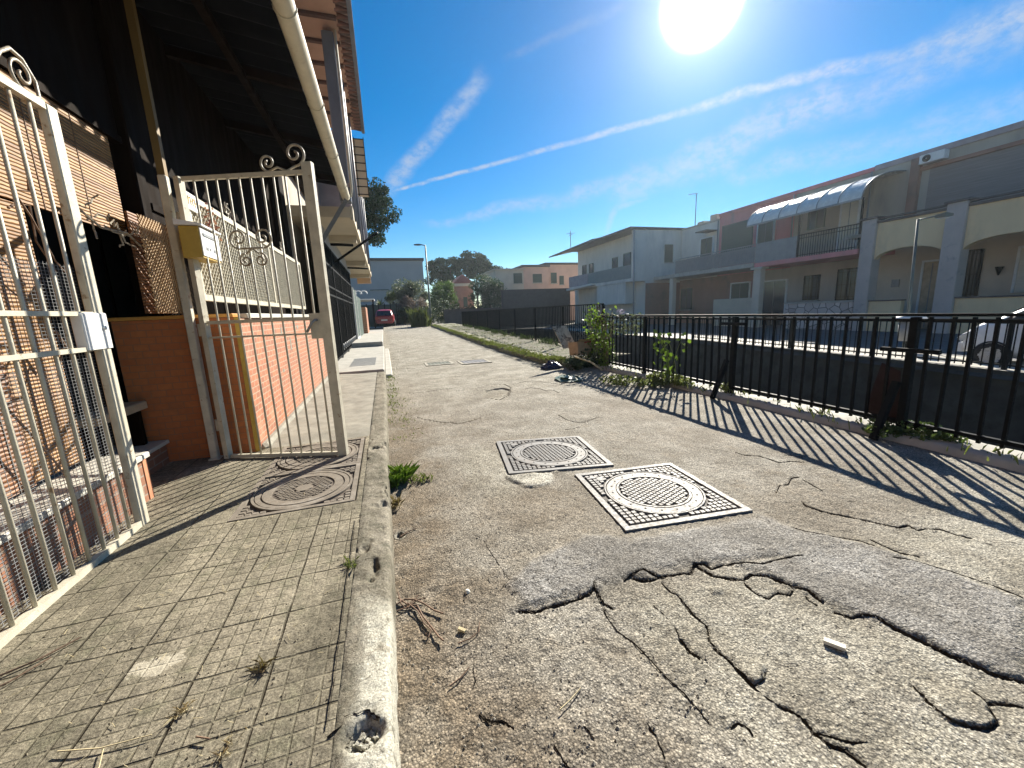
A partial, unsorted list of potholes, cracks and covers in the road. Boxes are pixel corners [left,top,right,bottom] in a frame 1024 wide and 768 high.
manhole cover [575,463,753,533]
manhole cover [227,462,361,522]
manhole cover [262,437,365,476]
manhole cover [496,436,614,475]
crack [484,452,1024,768]
